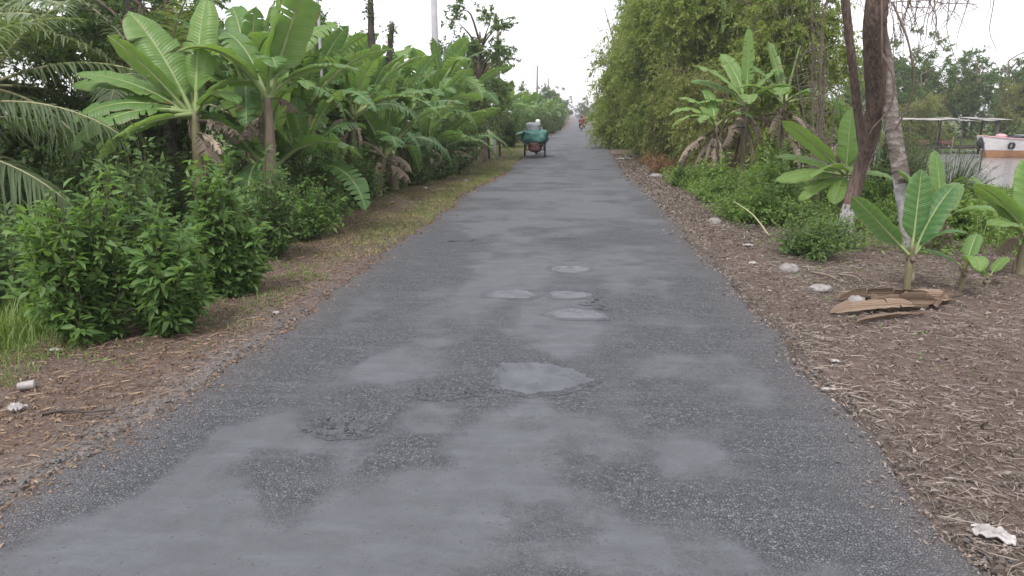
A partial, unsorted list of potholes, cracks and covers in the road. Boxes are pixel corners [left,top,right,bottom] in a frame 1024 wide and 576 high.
pothole [296,414,387,440]
crack [579,295,613,311]
